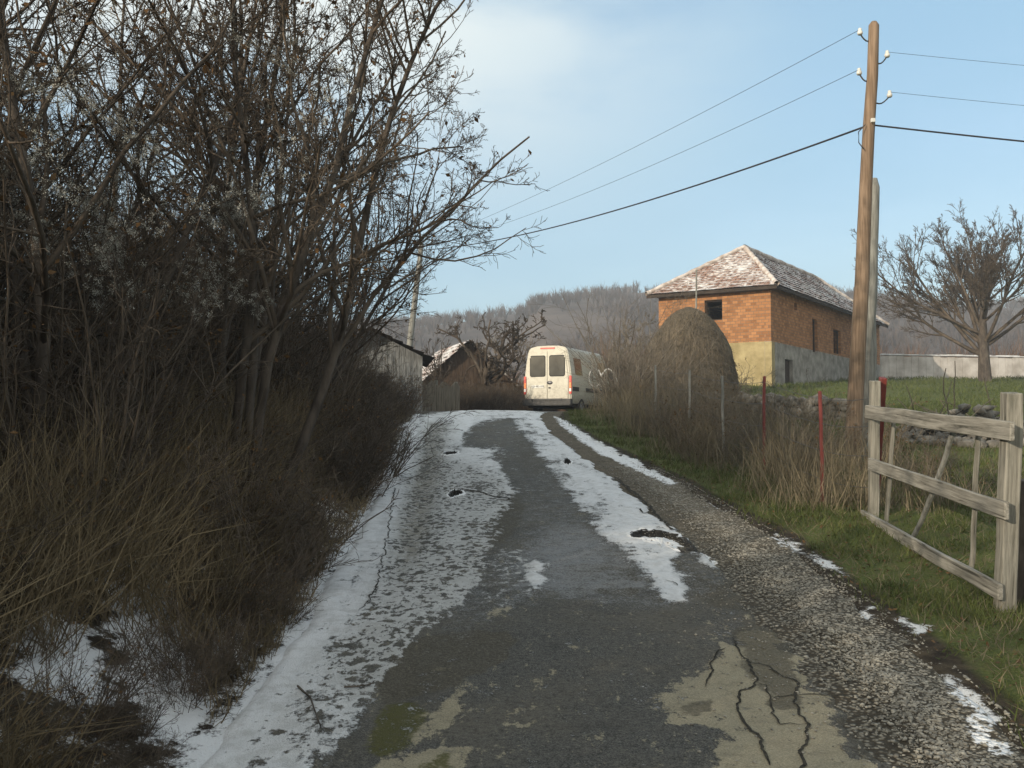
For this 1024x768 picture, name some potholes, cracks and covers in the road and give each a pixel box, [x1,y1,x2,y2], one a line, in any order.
crack [705,637,851,768]
pothole [626,528,698,553]
crack [361,488,396,608]
pothole [446,489,466,499]
